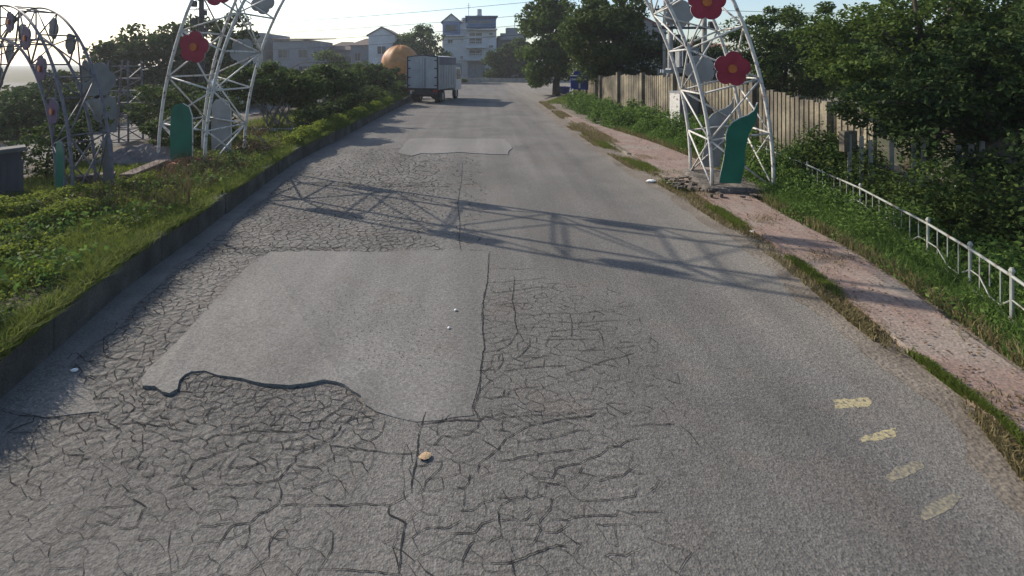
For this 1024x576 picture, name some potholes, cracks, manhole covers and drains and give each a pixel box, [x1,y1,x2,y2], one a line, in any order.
crack [0,148,735,576]
